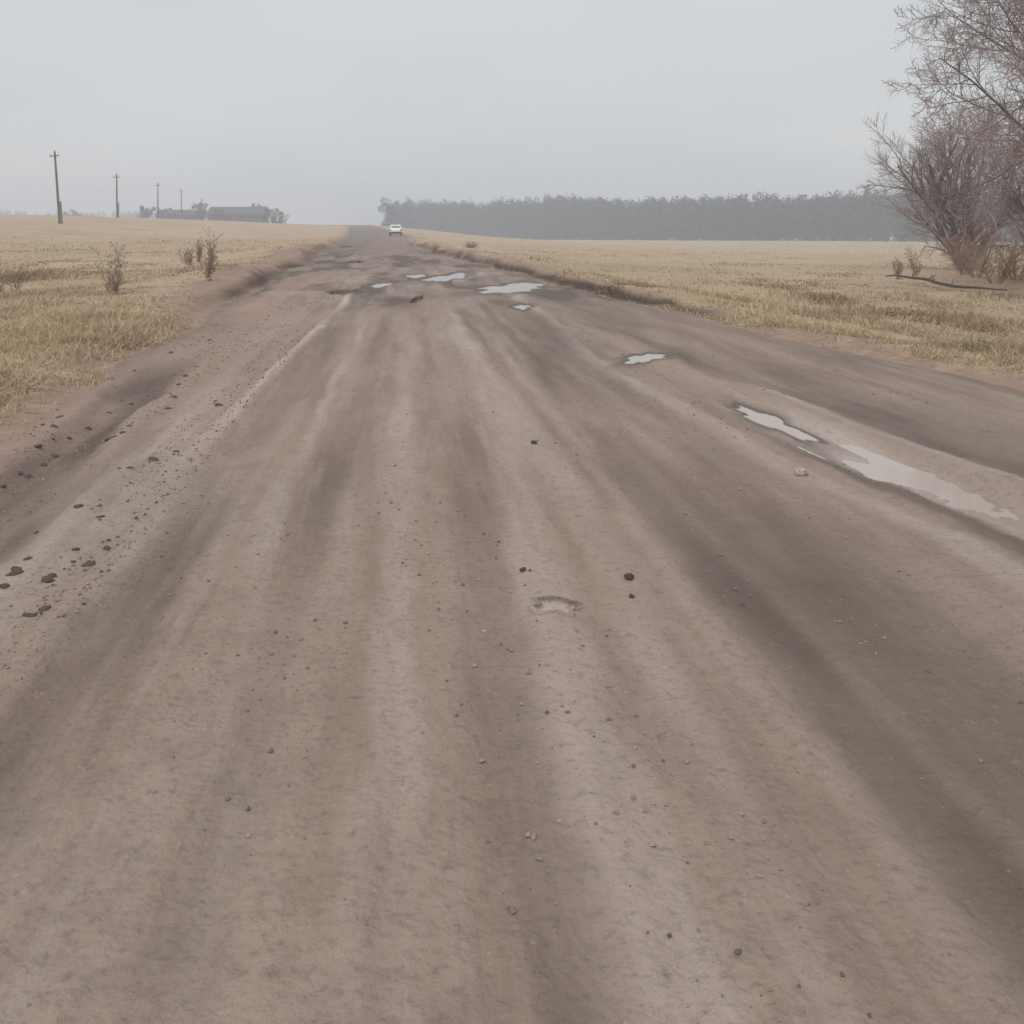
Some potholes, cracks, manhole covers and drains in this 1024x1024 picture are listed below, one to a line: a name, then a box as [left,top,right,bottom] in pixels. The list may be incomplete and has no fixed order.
pothole [464,281,551,295]
pothole [529,596,583,618]
pothole [412,271,473,283]
pothole [724,399,839,449]
pothole [617,351,675,365]
